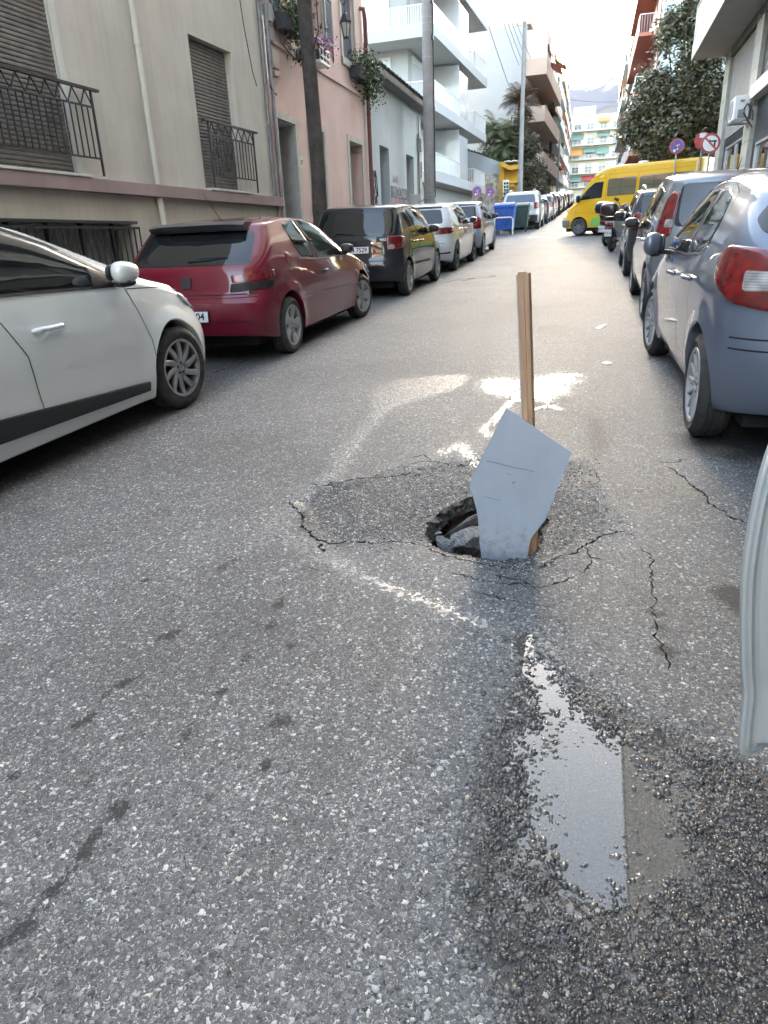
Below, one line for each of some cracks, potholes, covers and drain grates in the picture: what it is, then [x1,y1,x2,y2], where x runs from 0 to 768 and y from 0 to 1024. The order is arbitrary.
crack [668,459,747,523]
crack [289,502,671,672]
pothole [424,496,550,569]
